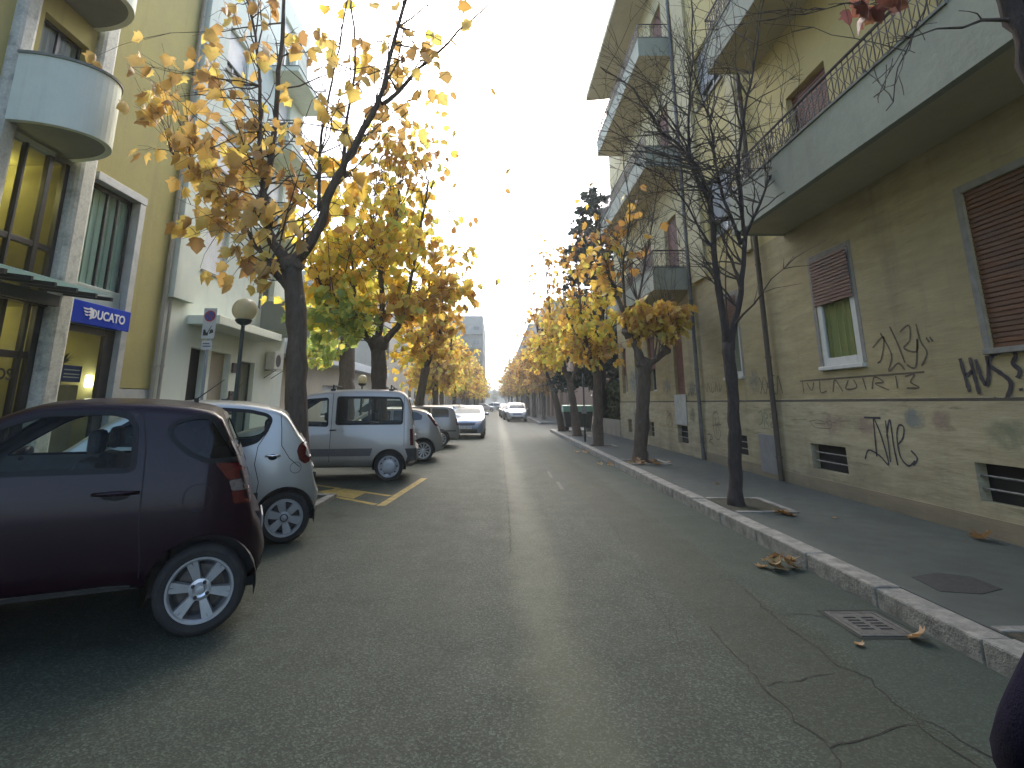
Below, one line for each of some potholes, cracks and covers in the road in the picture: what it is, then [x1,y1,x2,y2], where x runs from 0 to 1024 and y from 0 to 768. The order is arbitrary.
drain grate [816,610,929,639]
crack [710,581,992,768]
